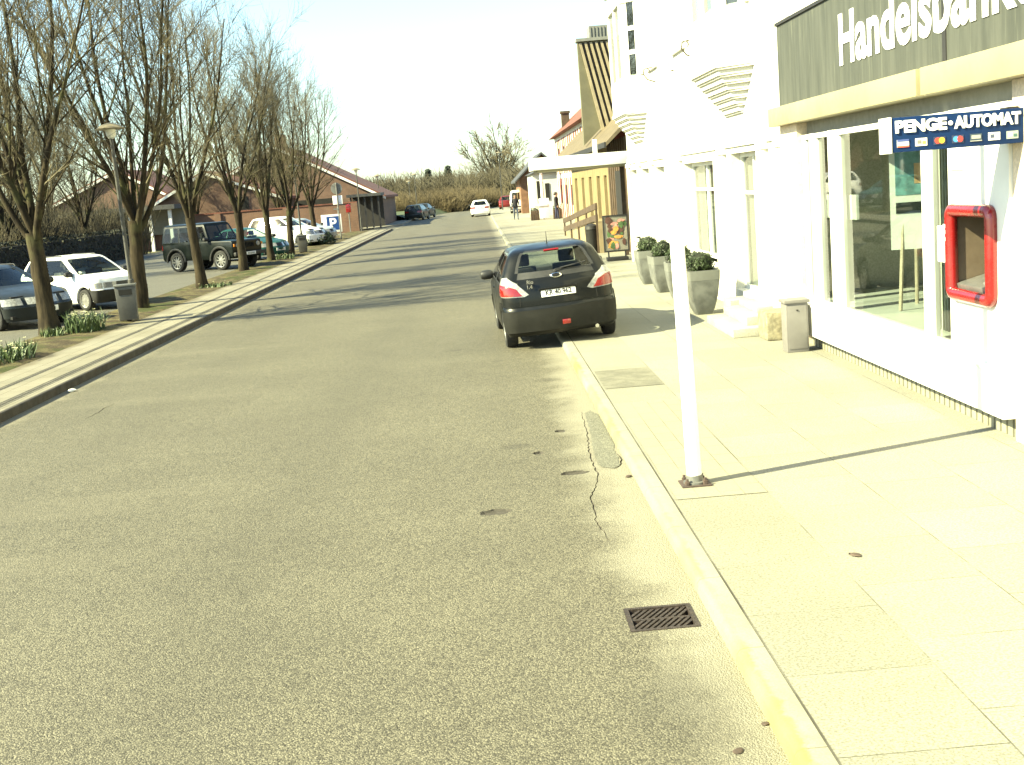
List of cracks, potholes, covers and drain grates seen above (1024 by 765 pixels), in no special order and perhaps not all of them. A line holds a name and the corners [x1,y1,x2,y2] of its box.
crack [582,416,623,542]
drain grate [623,603,701,632]
